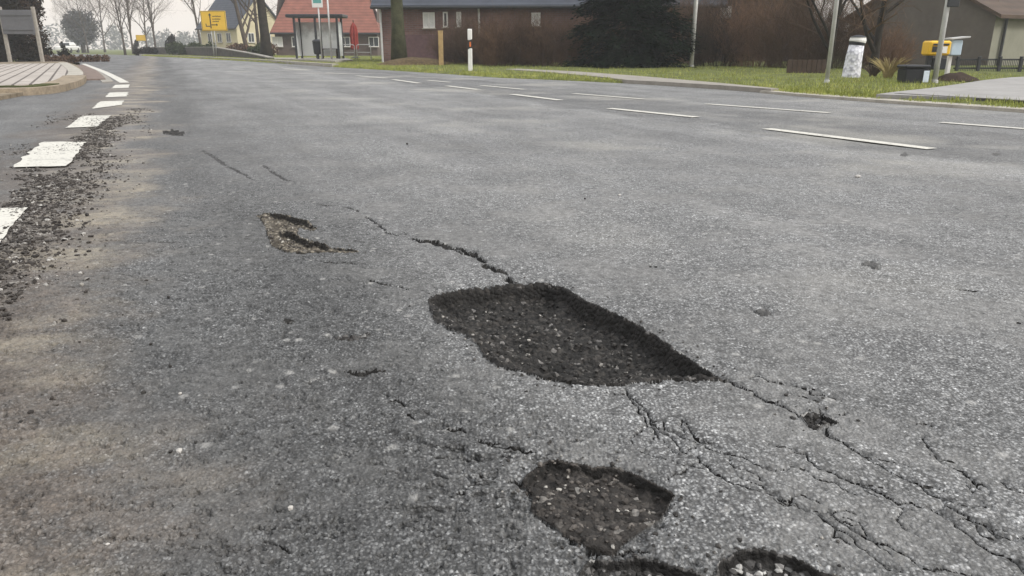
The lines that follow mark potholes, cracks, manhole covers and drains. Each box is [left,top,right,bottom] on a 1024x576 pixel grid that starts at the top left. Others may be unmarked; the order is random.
pothole [522,459,675,559]
pothole [428,282,727,387]
pothole [716,547,848,576]
crack [344,368,386,377]
pothole [799,412,839,430]
crack [388,399,414,420]
crack [263,165,290,181]
crack [316,204,513,283]
crack [614,376,1024,576]
pothole [256,213,359,254]
crack [321,261,409,290]
